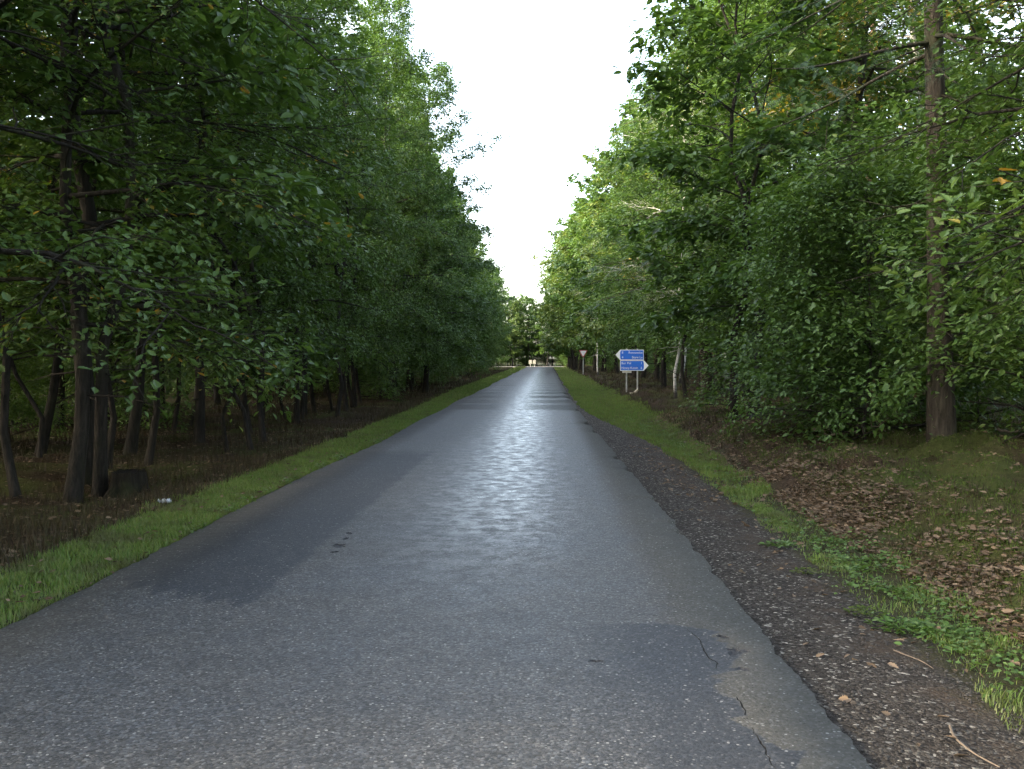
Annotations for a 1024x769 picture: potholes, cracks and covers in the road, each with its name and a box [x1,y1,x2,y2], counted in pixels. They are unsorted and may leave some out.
crack [736,697,776,769]
crack [686,628,719,669]
